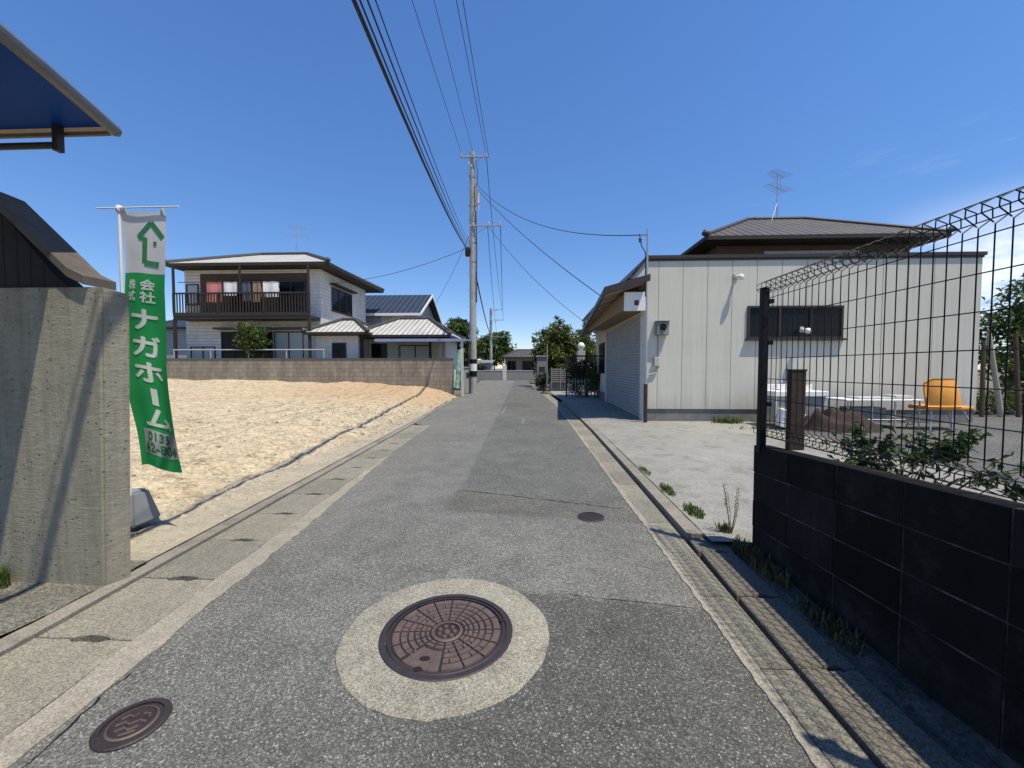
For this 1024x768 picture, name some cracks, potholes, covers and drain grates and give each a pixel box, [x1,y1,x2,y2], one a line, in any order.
manhole cover [577,512,604,522]
manhole cover [88,698,173,753]
manhole cover [336,579,550,723]
